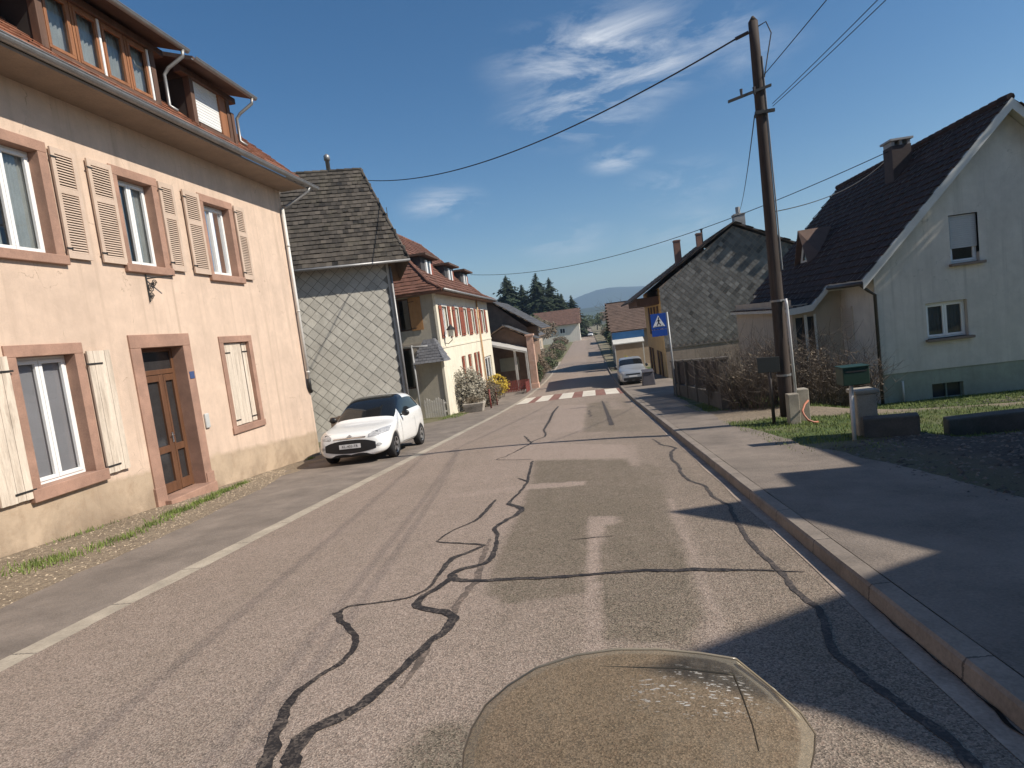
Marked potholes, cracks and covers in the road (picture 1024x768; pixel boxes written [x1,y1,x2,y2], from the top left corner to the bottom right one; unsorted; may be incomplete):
crack [496,406,559,460]
